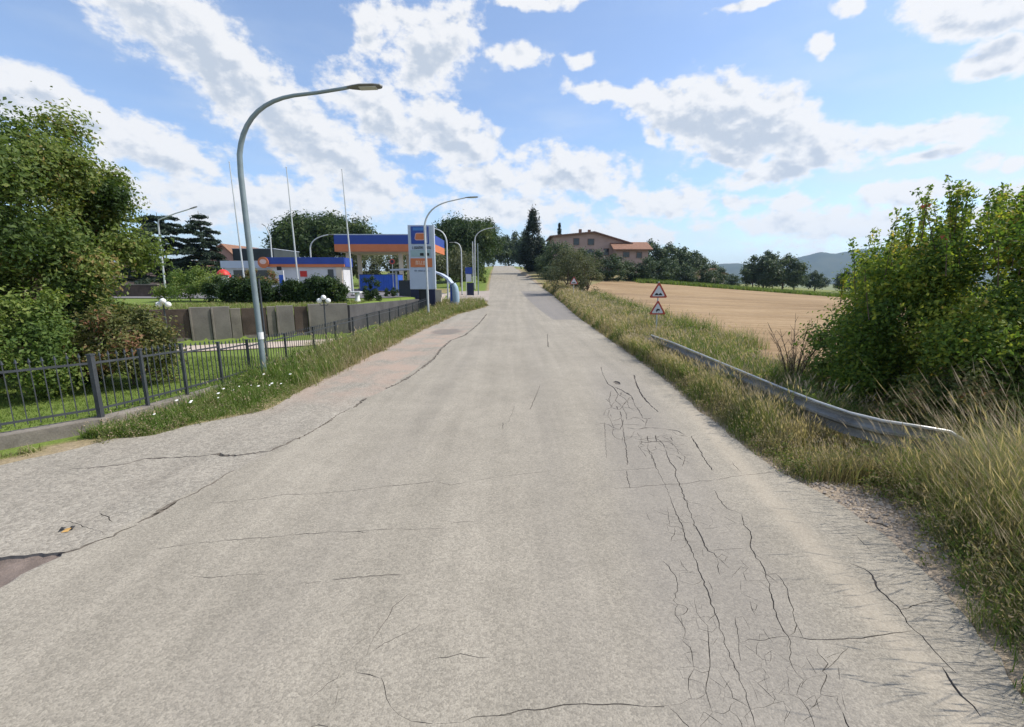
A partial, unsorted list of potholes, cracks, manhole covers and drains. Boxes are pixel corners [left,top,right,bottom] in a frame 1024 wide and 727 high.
crack [159,521,470,549]
pothole [0,552,62,588]
crack [601,369,981,727]
crack [311,596,664,727]
crack [218,471,546,503]
